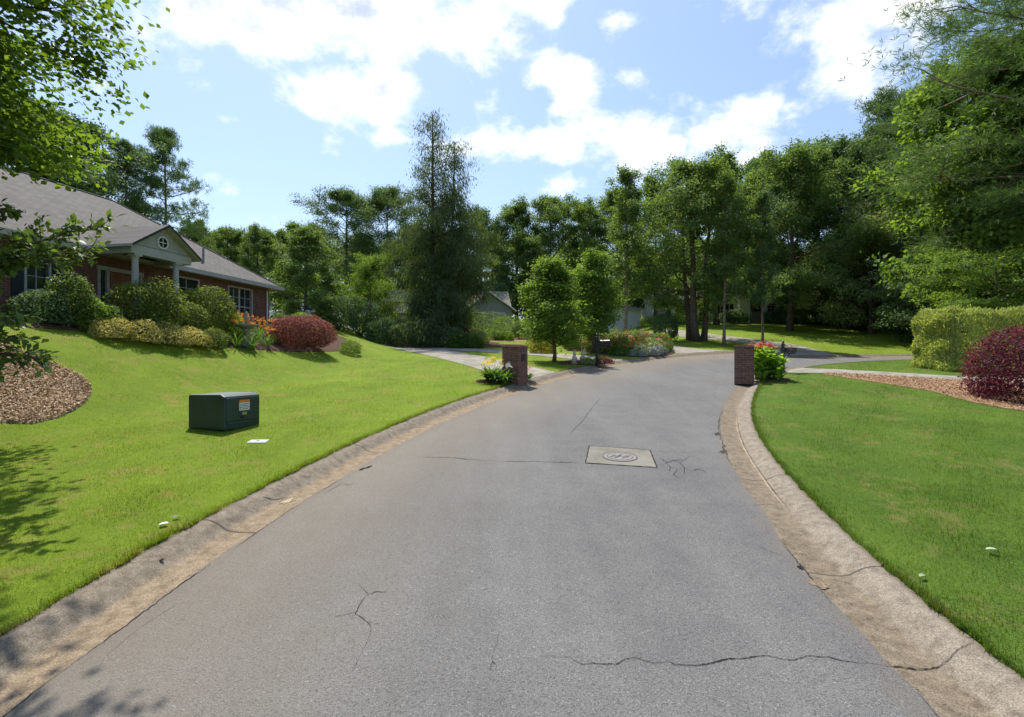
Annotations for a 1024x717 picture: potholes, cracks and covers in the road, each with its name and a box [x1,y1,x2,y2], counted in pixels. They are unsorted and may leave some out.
manhole cover [585,445,657,468]
crack [547,655,885,666]
